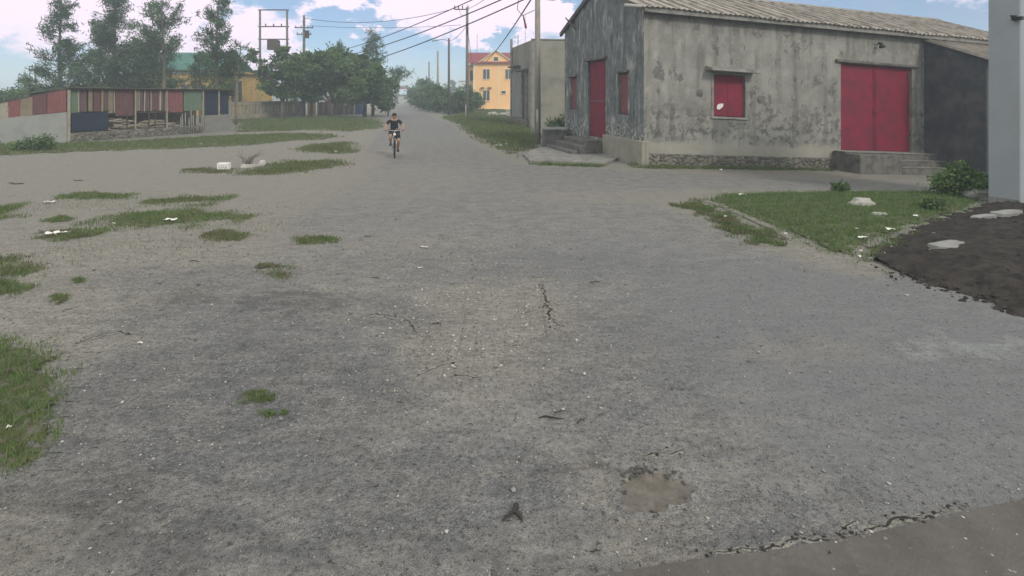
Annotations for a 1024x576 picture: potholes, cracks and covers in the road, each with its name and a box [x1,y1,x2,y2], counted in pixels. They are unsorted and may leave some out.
crack [538,281,567,334]
crack [641,446,687,459]
crack [689,502,967,560]
crack [350,313,430,337]
crack [408,361,483,380]
pothole [611,465,708,521]
crack [76,330,139,344]
